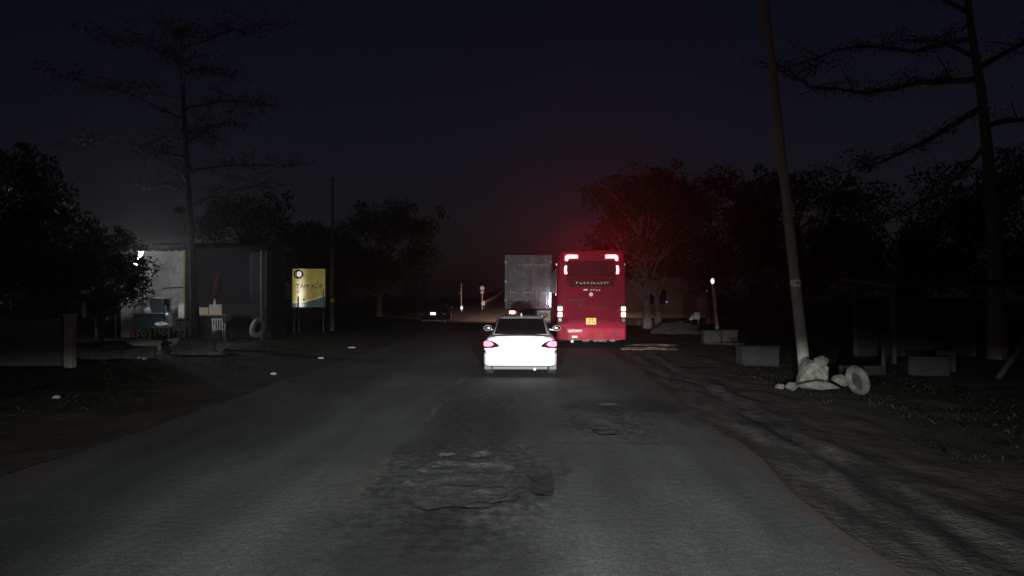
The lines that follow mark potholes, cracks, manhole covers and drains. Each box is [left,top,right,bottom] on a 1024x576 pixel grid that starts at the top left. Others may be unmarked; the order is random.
pothole [587,417,624,435]
pothole [400,461,516,511]
pothole [470,450,492,458]
pothole [525,467,556,496]
